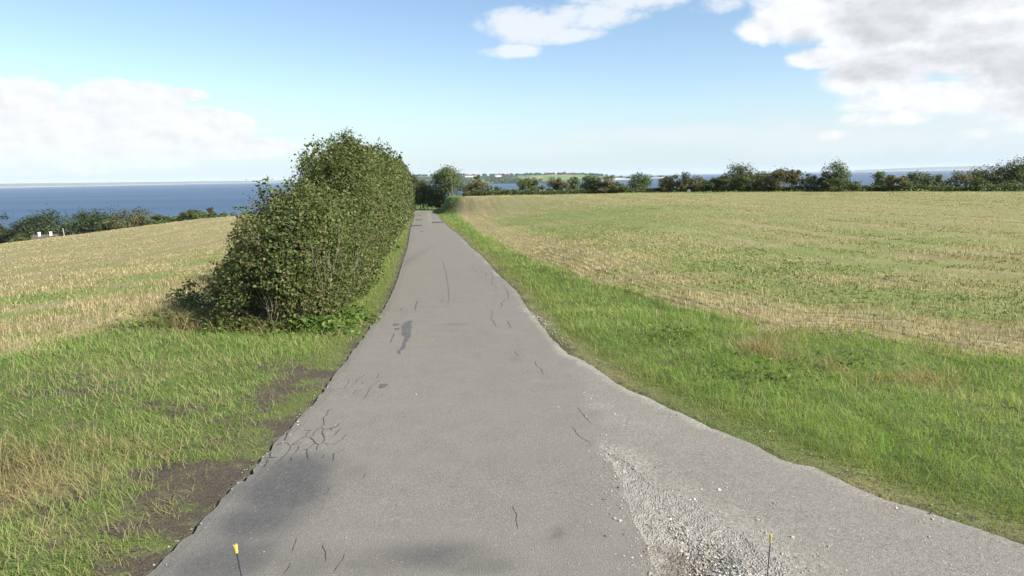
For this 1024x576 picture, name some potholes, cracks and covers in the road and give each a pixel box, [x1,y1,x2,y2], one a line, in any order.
crack [264,409,348,466]
